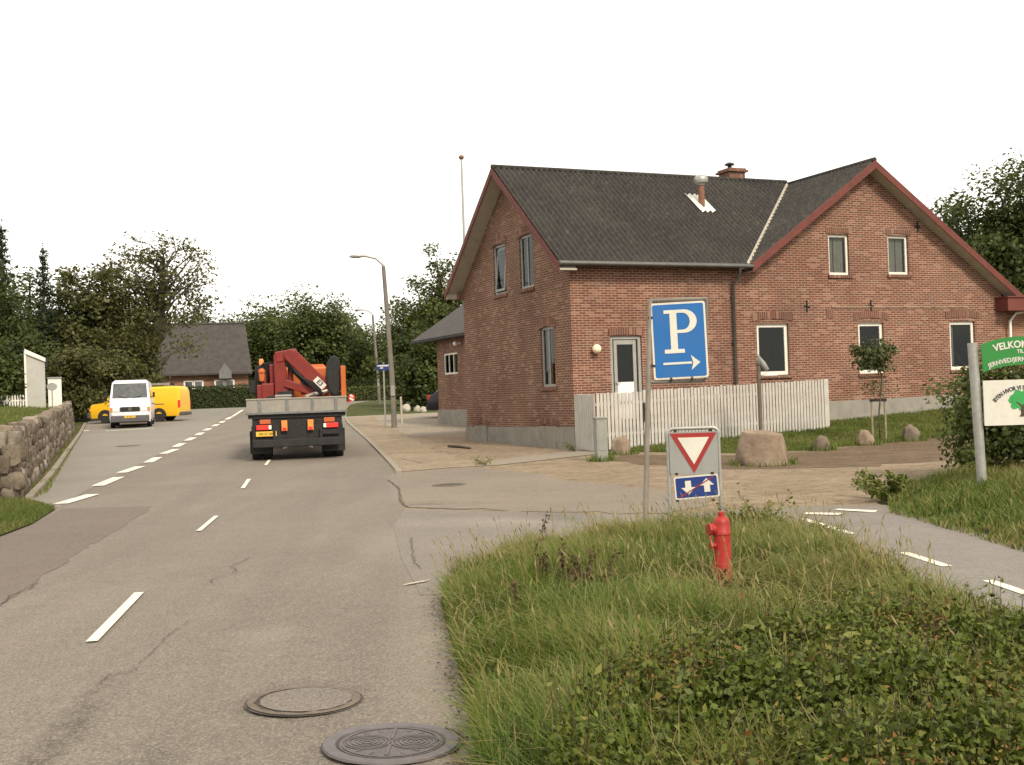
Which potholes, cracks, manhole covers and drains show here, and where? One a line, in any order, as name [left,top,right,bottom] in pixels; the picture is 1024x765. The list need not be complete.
manhole cover [244,685,363,717]
manhole cover [321,722,464,765]
crack [96,618,190,687]
